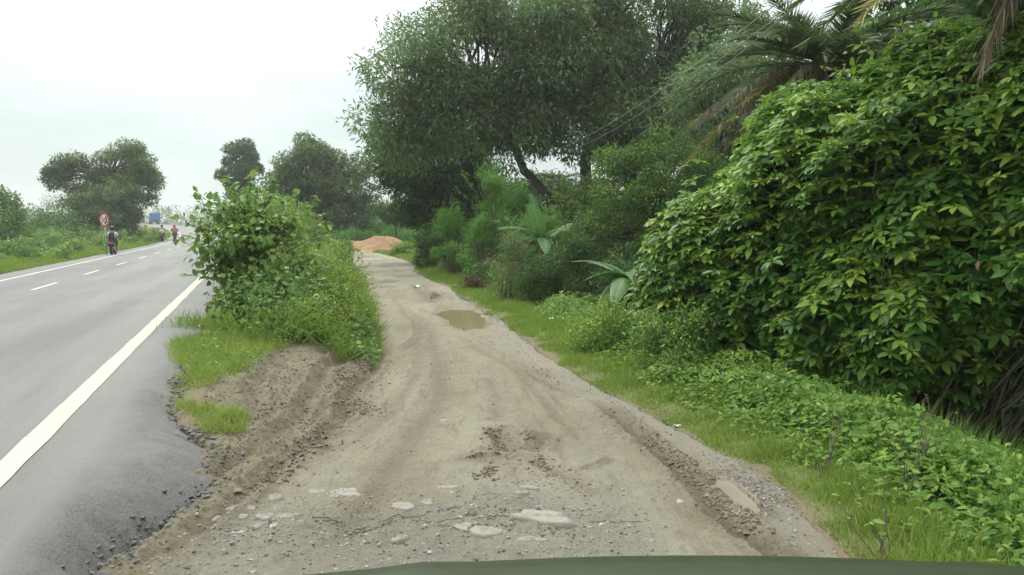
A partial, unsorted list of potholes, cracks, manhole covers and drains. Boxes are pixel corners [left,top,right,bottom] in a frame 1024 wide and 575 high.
pothole [434,307,492,331]
pothole [710,475,768,515]
pothole [459,450,508,460]
crack [312,514,510,533]
